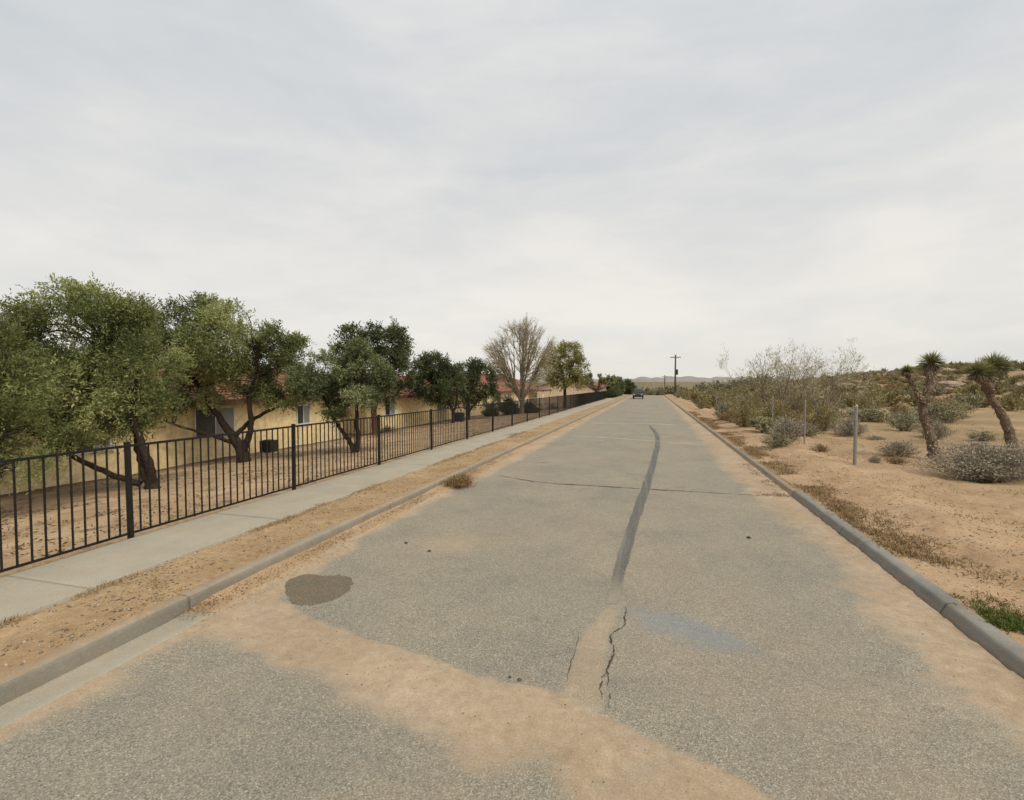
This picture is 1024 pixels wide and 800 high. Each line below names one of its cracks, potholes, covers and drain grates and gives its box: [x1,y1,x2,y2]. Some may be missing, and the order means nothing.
crack [599,605,627,708]
